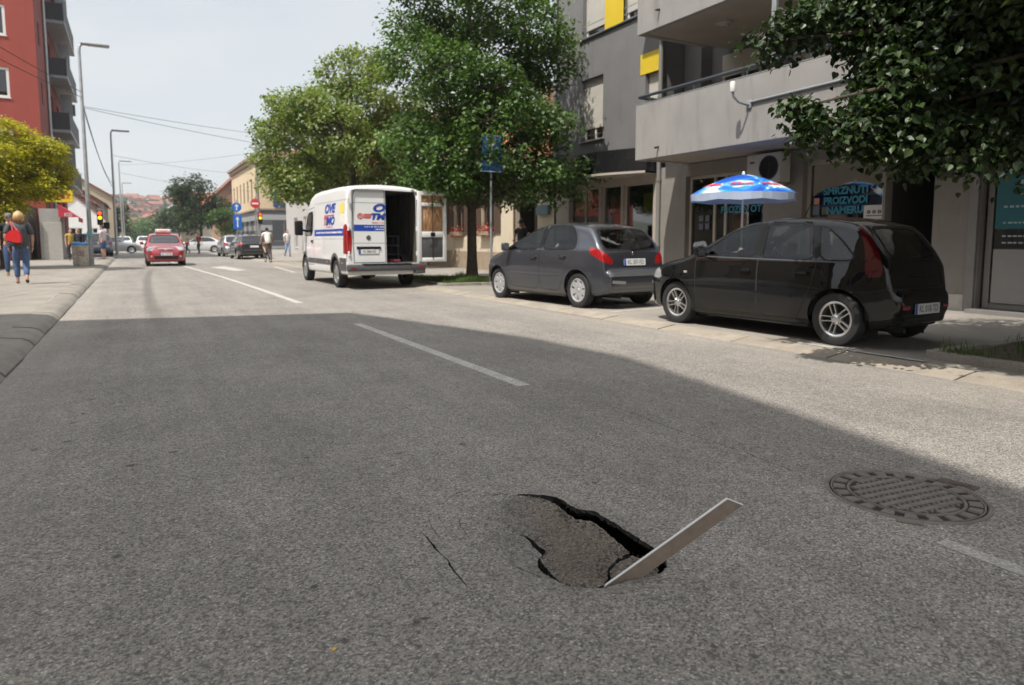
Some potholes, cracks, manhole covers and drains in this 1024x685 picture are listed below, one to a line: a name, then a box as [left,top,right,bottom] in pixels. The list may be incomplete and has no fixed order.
pothole [500,494,667,589]
manhole cover [824,469,995,527]
crack [423,491,541,587]
